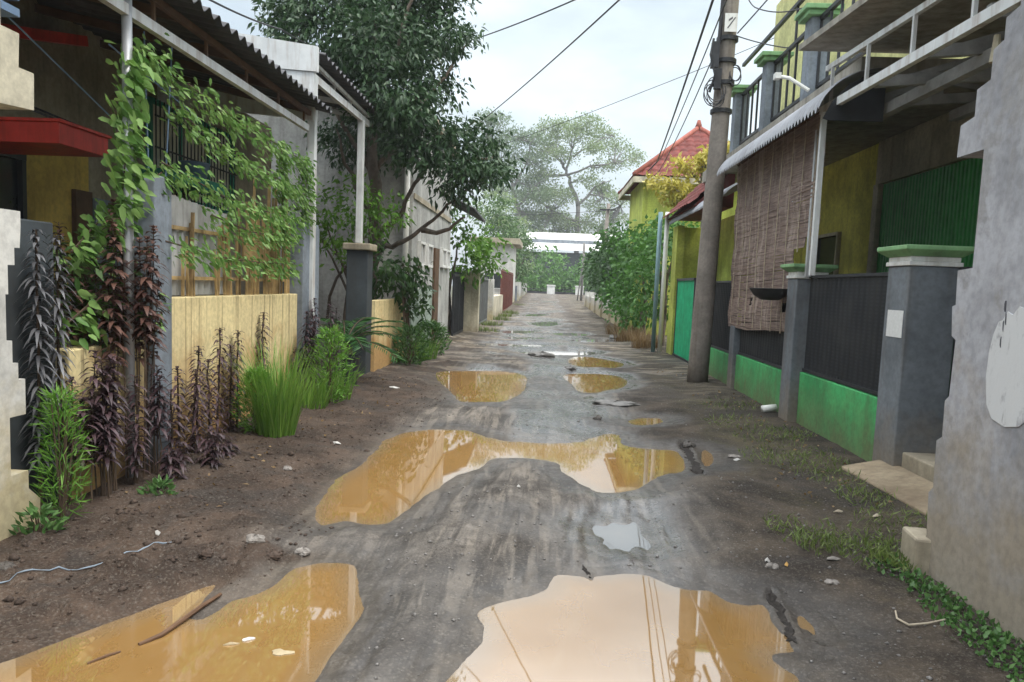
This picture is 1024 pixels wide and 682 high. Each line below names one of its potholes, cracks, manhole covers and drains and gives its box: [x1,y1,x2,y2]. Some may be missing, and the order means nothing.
pothole [299,426,693,530]
pothole [413,564,826,682]
pothole [425,368,537,404]
pothole [561,356,632,368]
pothole [576,514,668,557]
pothole [619,416,672,426]
pothole [0,553,386,682]
pothole [554,371,637,394]
